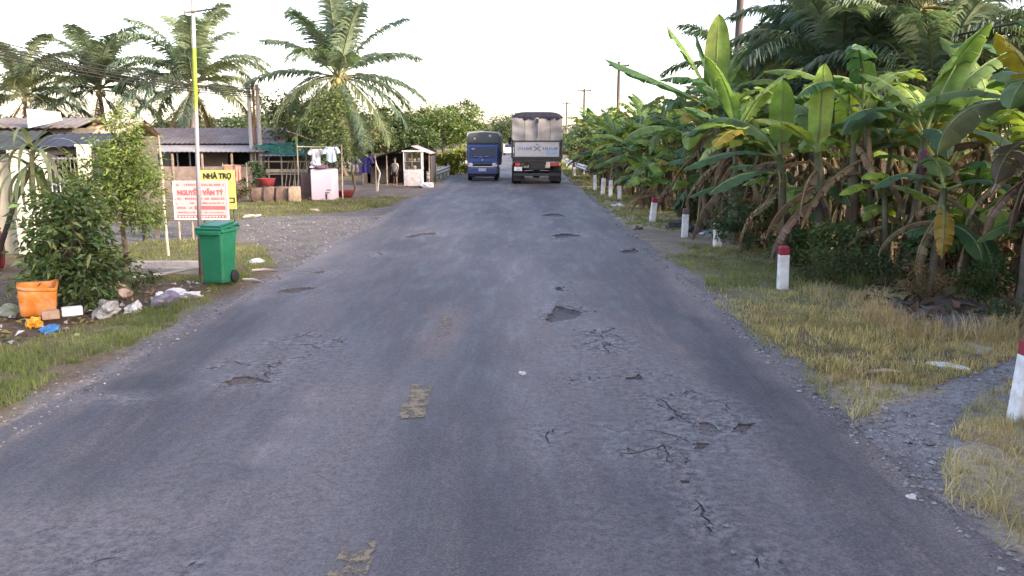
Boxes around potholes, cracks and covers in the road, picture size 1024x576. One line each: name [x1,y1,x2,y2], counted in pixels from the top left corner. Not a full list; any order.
crack [581,328,624,353]
crack [209,331,340,379]
pothole [545,306,581,322]
crack [695,500,760,568]
crack [606,373,732,465]
pothole [221,376,271,385]
